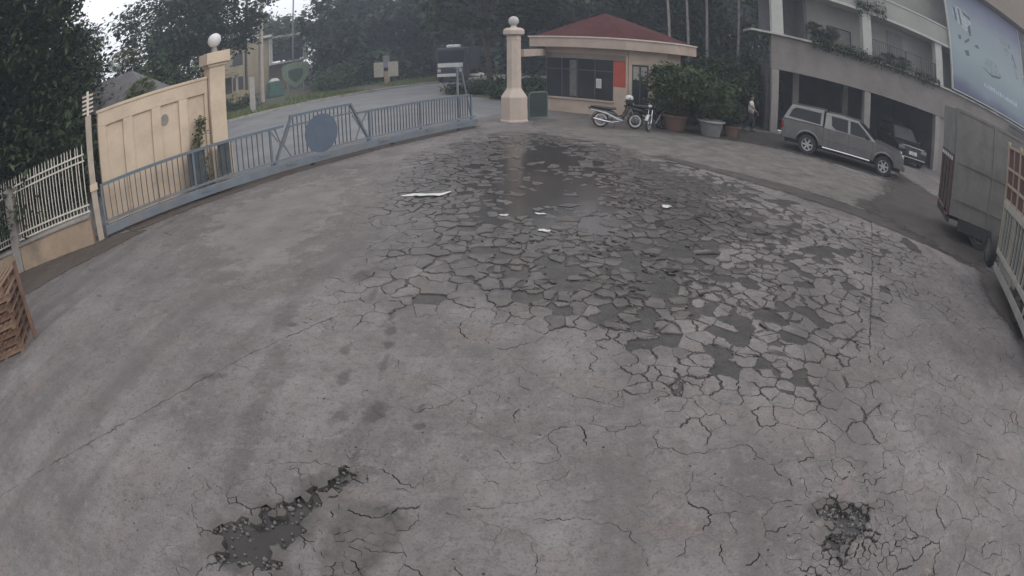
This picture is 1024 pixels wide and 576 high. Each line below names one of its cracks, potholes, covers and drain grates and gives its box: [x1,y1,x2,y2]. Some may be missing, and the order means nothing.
pothole [213,454,356,571]
pothole [812,498,879,550]
crack [115,135,1020,576]
